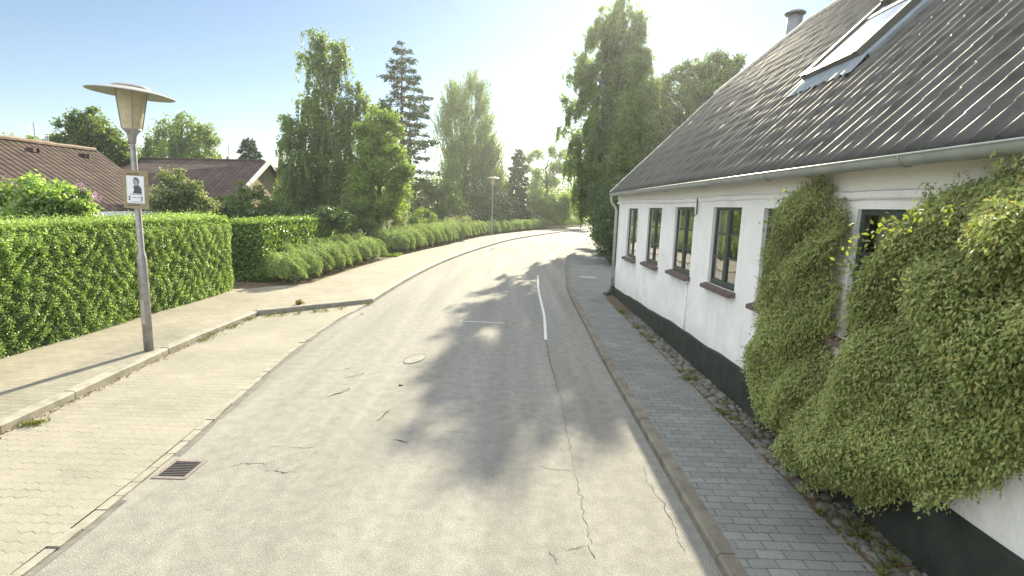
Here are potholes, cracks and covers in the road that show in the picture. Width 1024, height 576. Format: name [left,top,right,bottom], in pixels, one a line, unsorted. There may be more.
crack [537,343,595,564]
drain grate [151,459,208,480]
manhole cover [403,354,427,364]
